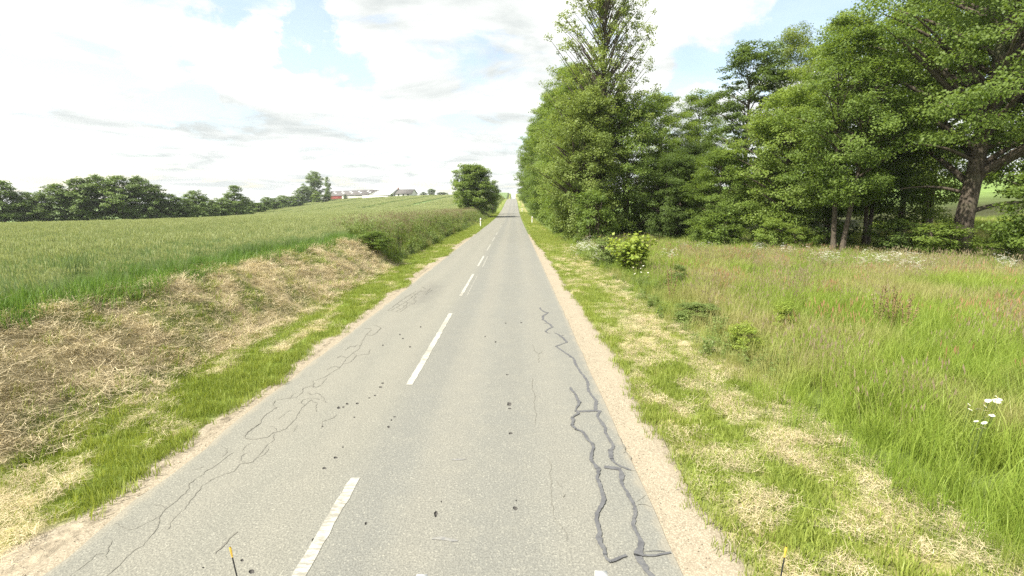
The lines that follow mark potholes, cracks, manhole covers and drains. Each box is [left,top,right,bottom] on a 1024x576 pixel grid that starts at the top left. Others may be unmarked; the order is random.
crack [547,458,567,540]
crack [76,286,431,576]
